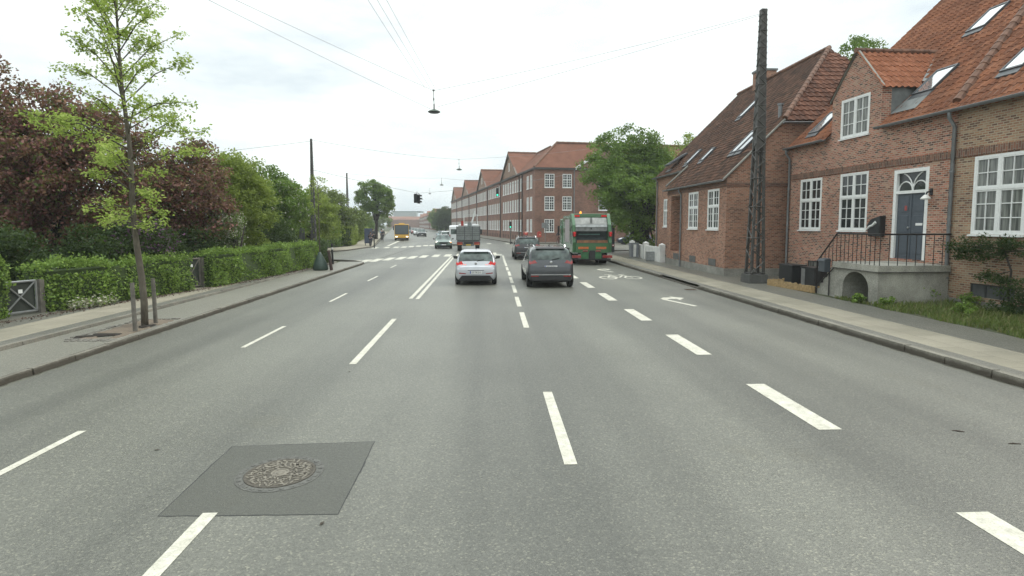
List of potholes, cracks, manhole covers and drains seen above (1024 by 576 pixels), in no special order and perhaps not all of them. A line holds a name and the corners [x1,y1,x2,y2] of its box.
manhole cover [234,456,324,493]
